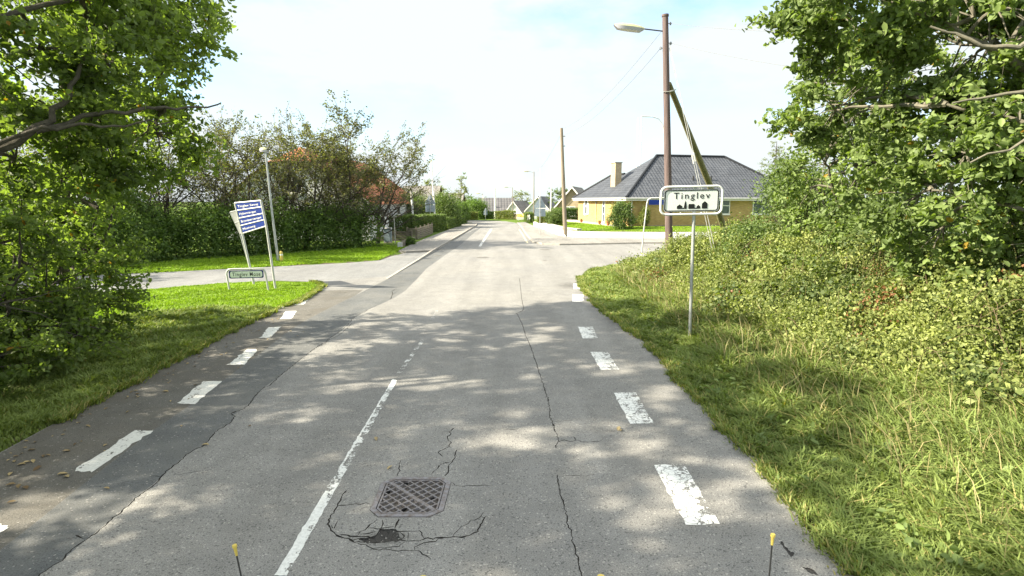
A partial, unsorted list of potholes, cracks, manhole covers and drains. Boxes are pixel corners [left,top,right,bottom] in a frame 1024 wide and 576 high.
crack [557,474,594,576]
pothole [359,529,402,546]
crack [327,490,486,559]
crack [516,276,599,448]
crack [432,427,488,487]
